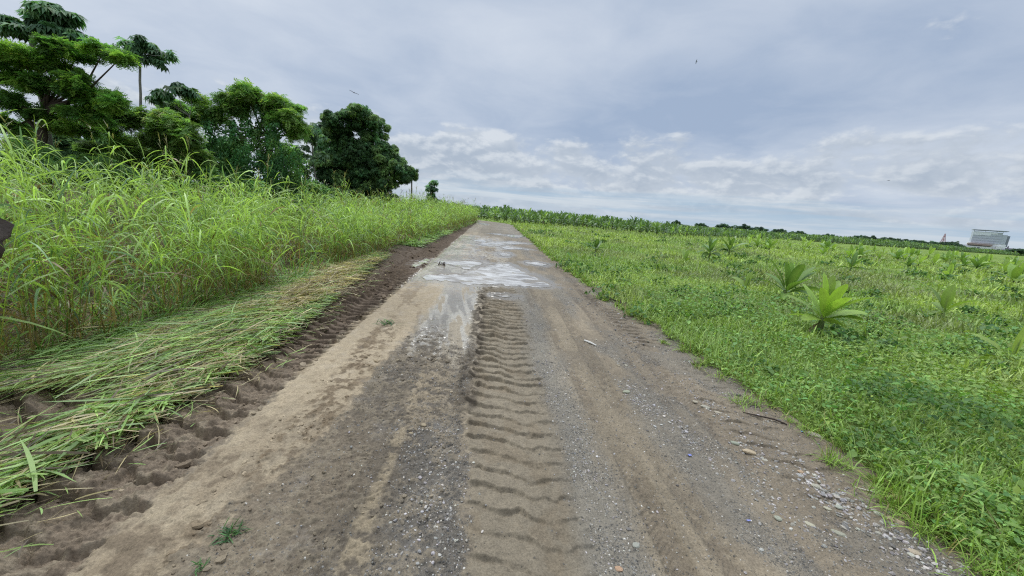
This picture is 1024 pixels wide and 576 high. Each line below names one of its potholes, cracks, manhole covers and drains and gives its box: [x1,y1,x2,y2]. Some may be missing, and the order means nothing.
pothole [421,263,552,288]
pothole [434,259,484,269]
